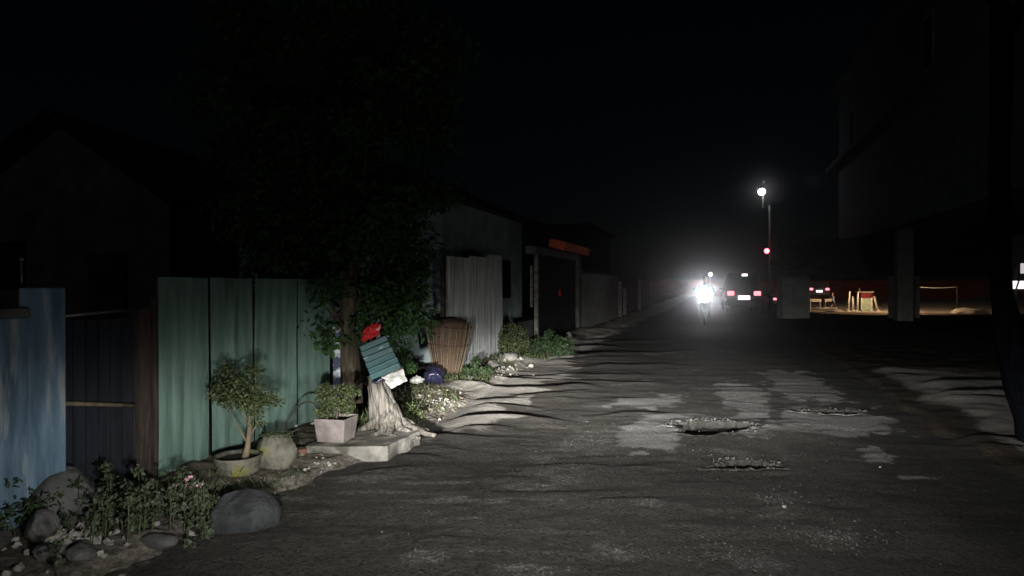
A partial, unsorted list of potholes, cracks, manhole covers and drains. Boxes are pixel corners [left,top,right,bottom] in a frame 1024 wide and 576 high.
pothole [696,457,795,471]
pothole [784,407,873,416]
pothole [658,418,776,438]
